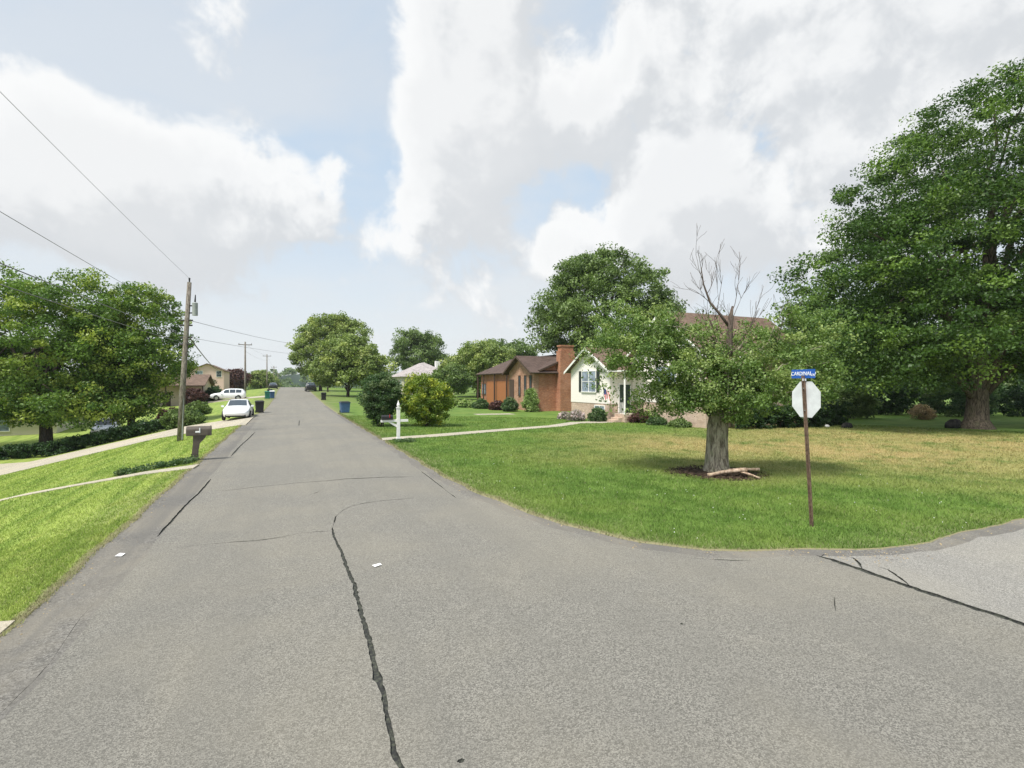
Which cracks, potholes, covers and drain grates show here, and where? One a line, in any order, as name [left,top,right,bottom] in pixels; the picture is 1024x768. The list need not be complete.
crack [176,498,408,768]
